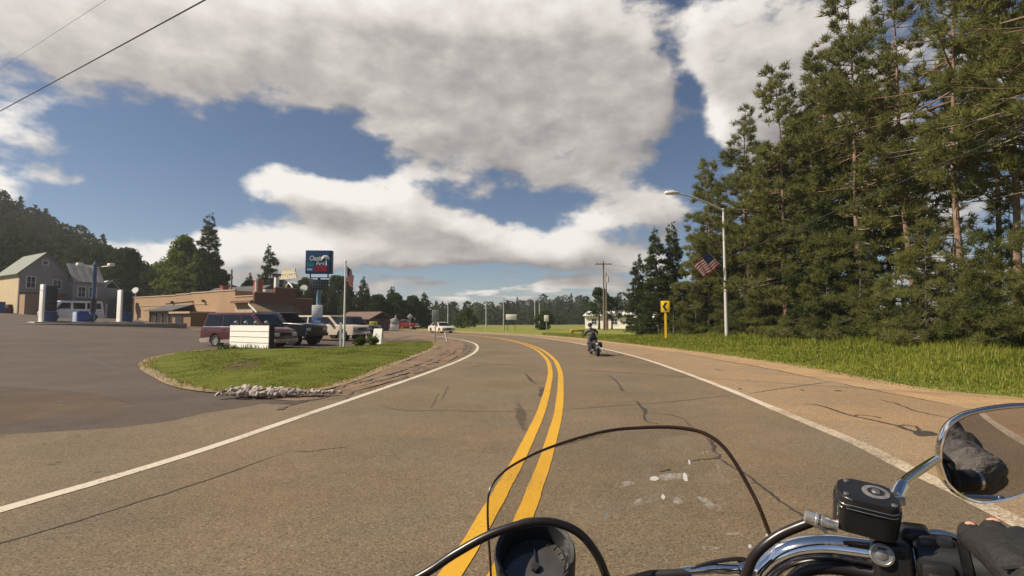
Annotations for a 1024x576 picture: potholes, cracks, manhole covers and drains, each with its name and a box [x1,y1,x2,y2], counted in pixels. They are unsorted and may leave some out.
crack [380,385,537,412]
crack [566,395,726,410]
